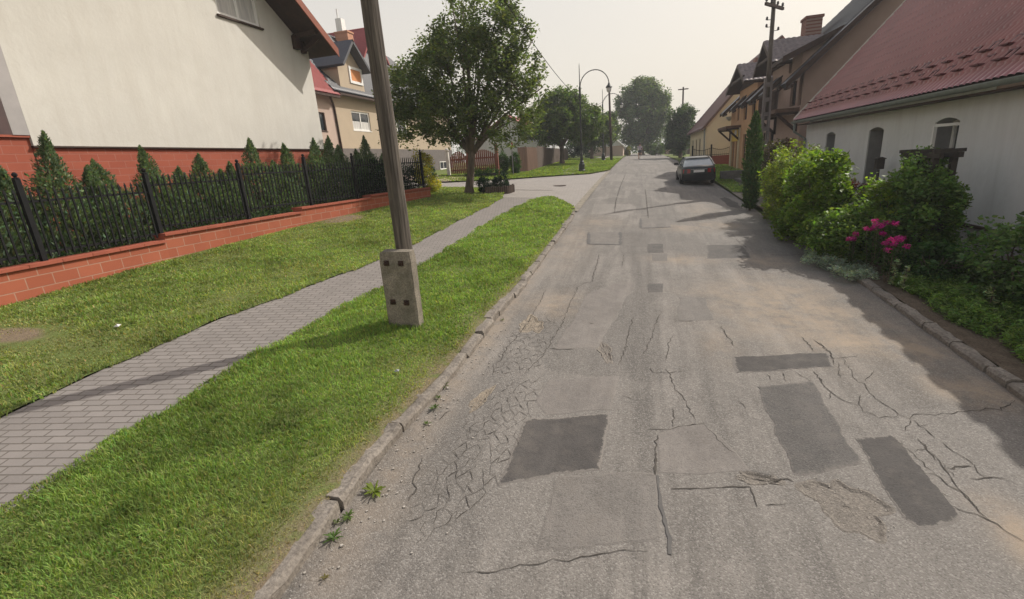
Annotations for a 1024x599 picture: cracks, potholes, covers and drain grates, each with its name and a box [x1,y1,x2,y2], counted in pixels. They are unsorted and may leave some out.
crack [618,316,735,453]
crack [767,337,1023,541]
crack [671,476,794,505]
crack [409,376,542,541]
crack [493,291,564,374]
crack [461,549,643,573]
